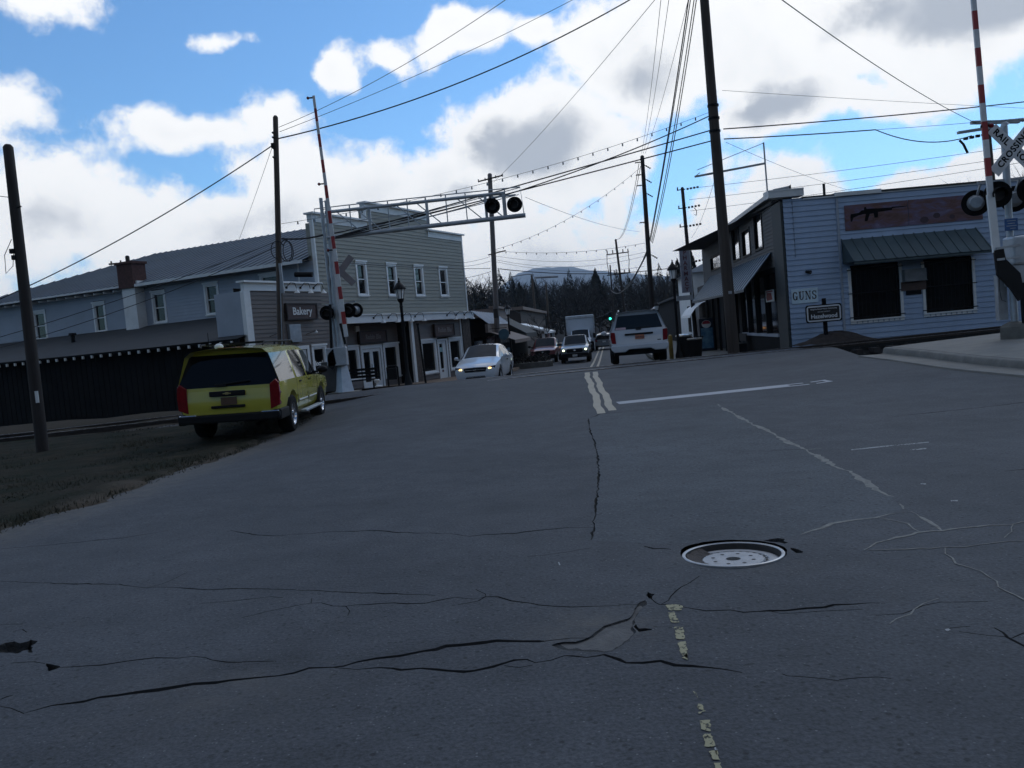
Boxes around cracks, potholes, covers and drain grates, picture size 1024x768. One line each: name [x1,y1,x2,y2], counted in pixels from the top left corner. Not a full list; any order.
crack [2,404,1024,647]
pothole [0,640,37,654]
pothole [552,600,647,653]
crack [0,638,742,714]
manhole cover [682,542,785,570]
